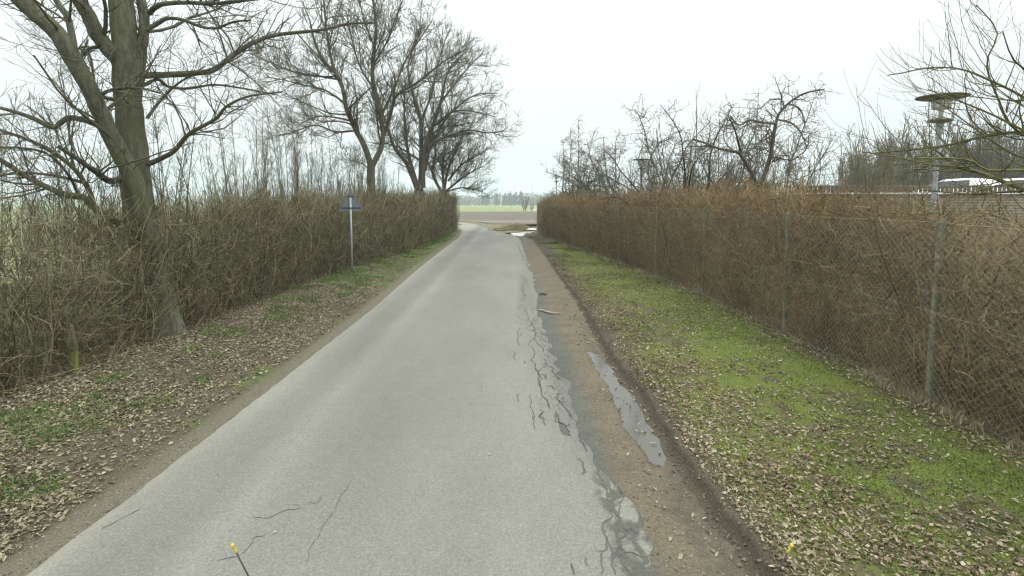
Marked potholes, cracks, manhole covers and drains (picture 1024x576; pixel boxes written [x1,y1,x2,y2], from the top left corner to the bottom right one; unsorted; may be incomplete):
crack [100,485,145,528]
crack [512,274,641,575]
